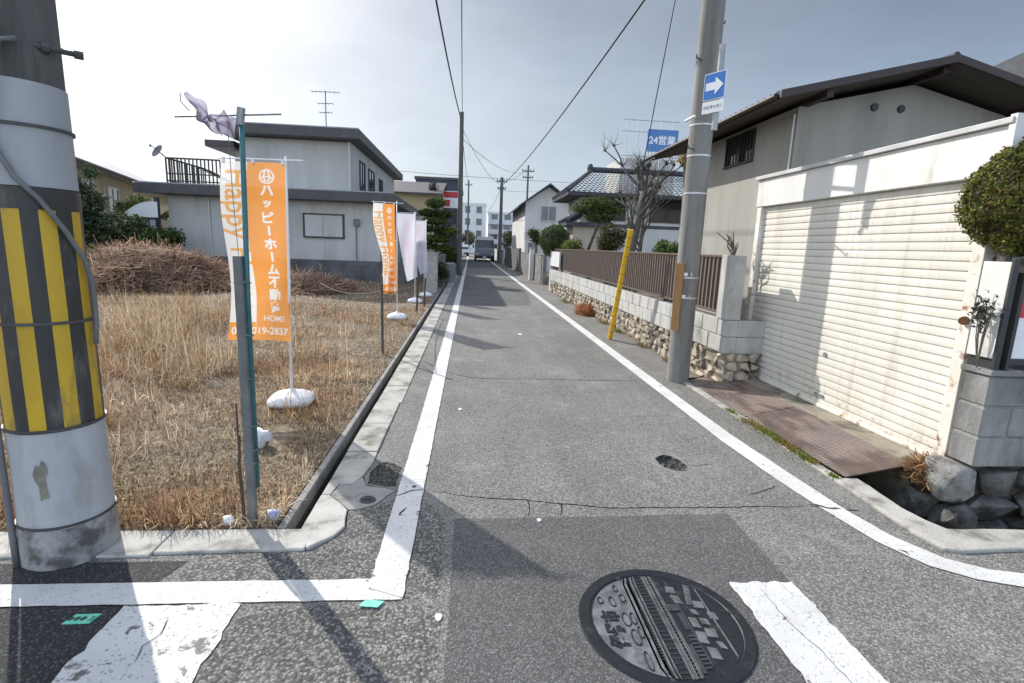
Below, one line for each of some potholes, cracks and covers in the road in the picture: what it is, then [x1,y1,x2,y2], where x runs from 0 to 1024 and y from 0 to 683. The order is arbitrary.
pothole [655,455,687,471]
utility cover [359,495,376,504]
manhole cover [578,569,758,683]
crack [395,486,859,516]
